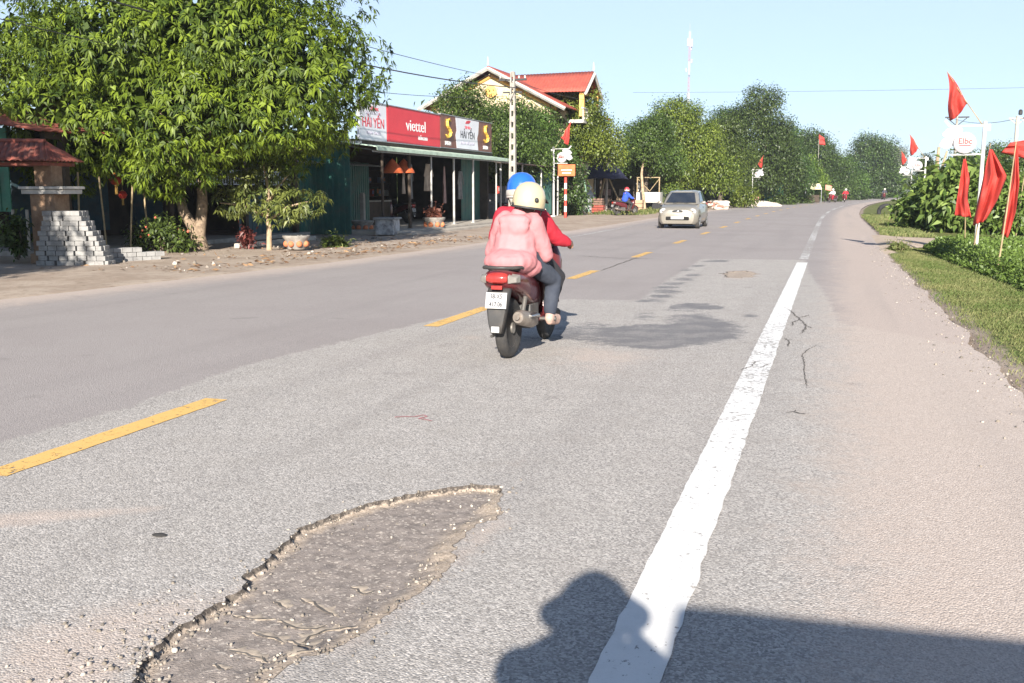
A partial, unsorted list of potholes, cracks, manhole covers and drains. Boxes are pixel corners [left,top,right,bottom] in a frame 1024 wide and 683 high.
pothole [132,484,504,683]
crack [786,309,817,388]
